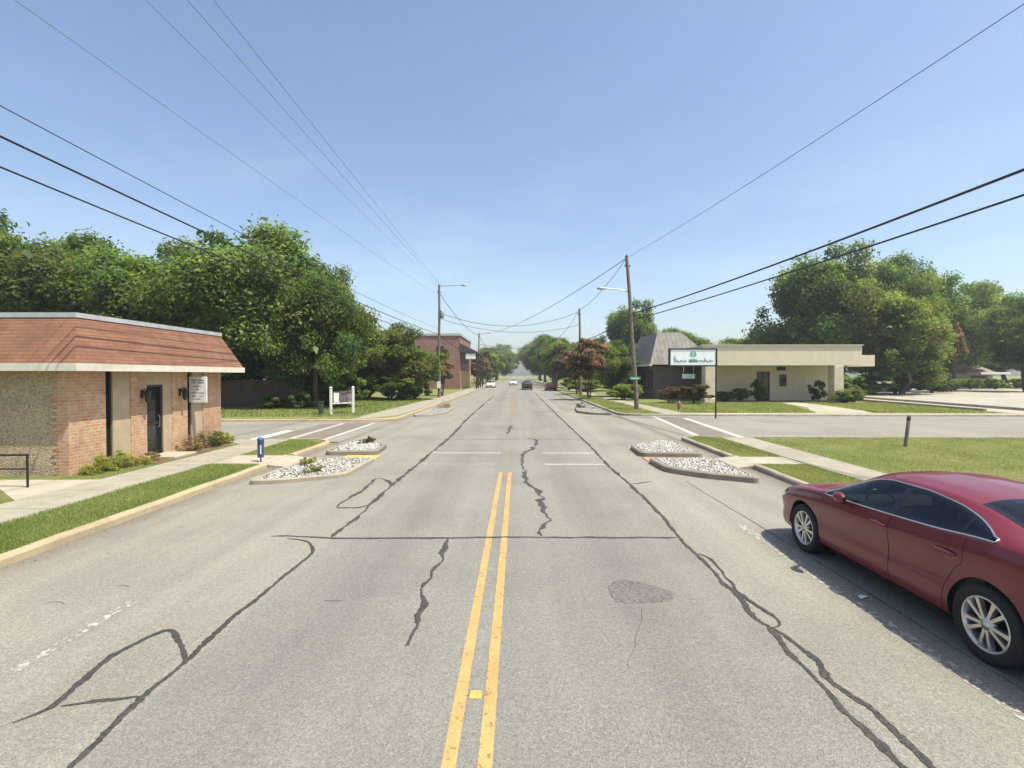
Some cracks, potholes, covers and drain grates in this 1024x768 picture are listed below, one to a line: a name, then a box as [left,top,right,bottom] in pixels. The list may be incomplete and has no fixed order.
crack [406,538,449,646]
crack [472,425,582,536]
